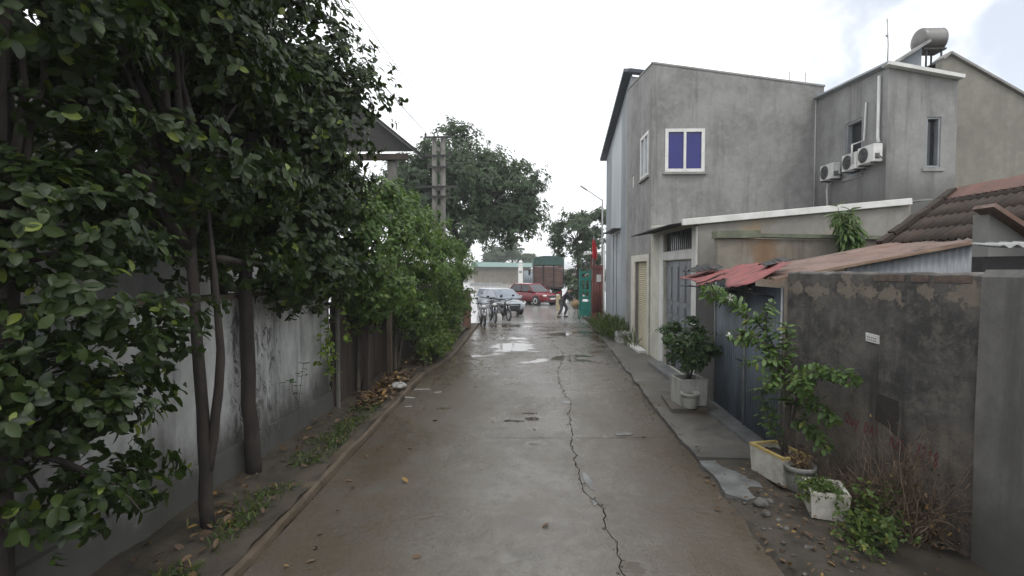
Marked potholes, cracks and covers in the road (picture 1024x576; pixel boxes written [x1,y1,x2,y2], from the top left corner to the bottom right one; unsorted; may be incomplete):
crack [551,343,648,576]
